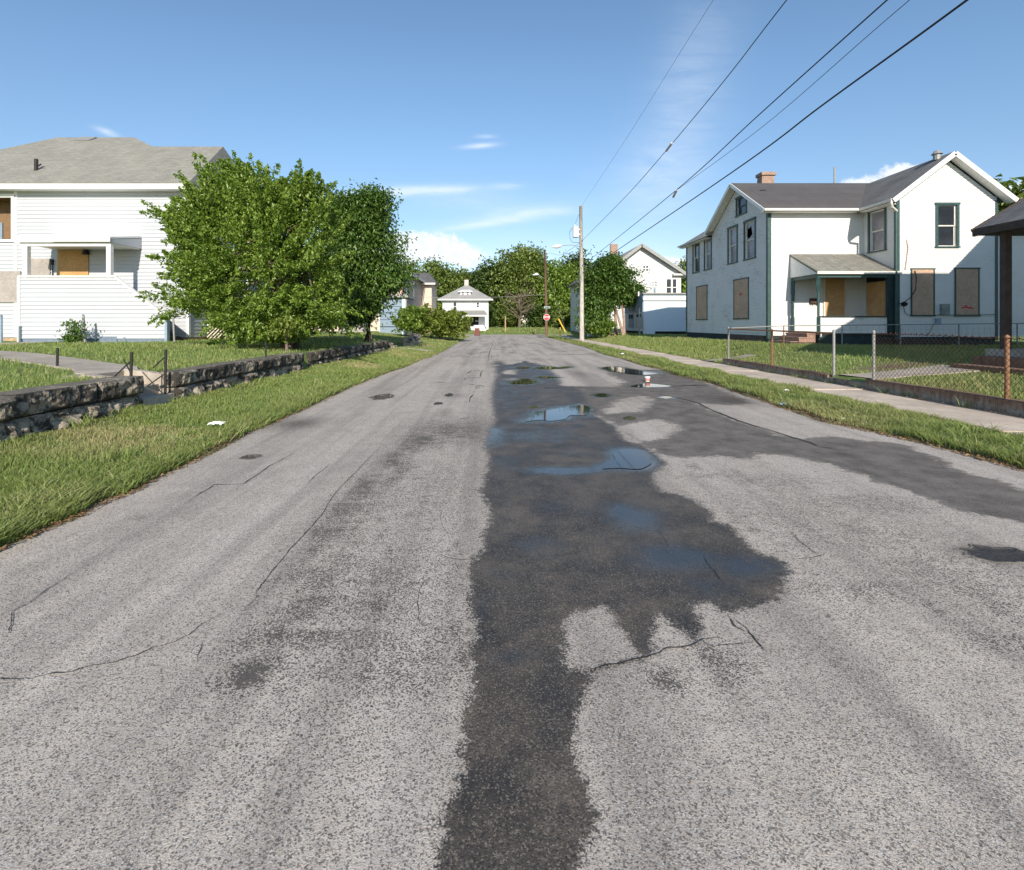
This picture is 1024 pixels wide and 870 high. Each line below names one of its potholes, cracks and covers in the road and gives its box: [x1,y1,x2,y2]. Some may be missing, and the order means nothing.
crack [1,614,220,679]
crack [3,564,88,638]
crack [574,615,771,671]
crack [248,447,380,606]
